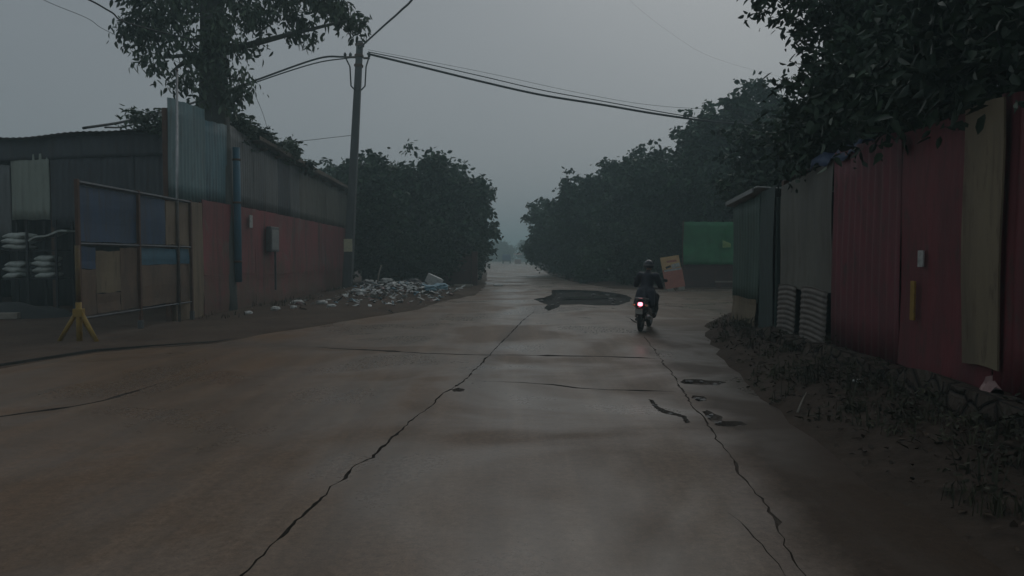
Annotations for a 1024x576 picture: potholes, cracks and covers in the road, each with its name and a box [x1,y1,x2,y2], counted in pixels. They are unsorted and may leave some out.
crack [239,314,806,576]
pothole [702,410,748,427]
crack [0,382,162,417]
